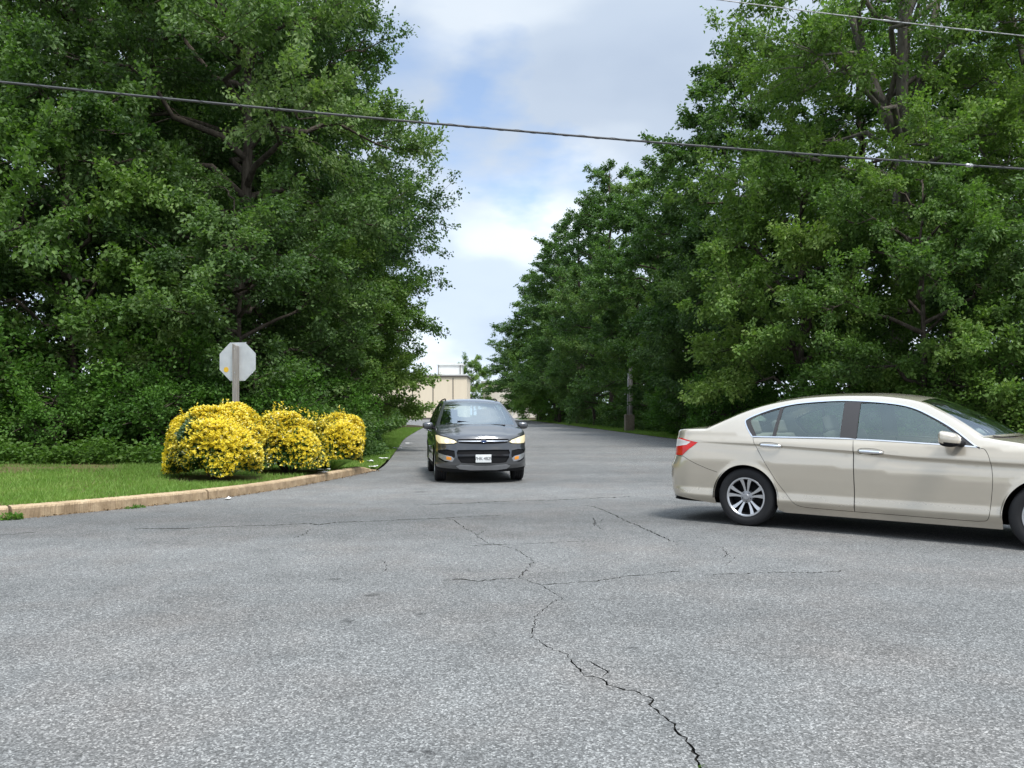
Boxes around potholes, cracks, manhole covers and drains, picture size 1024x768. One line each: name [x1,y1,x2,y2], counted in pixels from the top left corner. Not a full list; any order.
crack [586,505,674,542]
crack [452,520,702,768]
